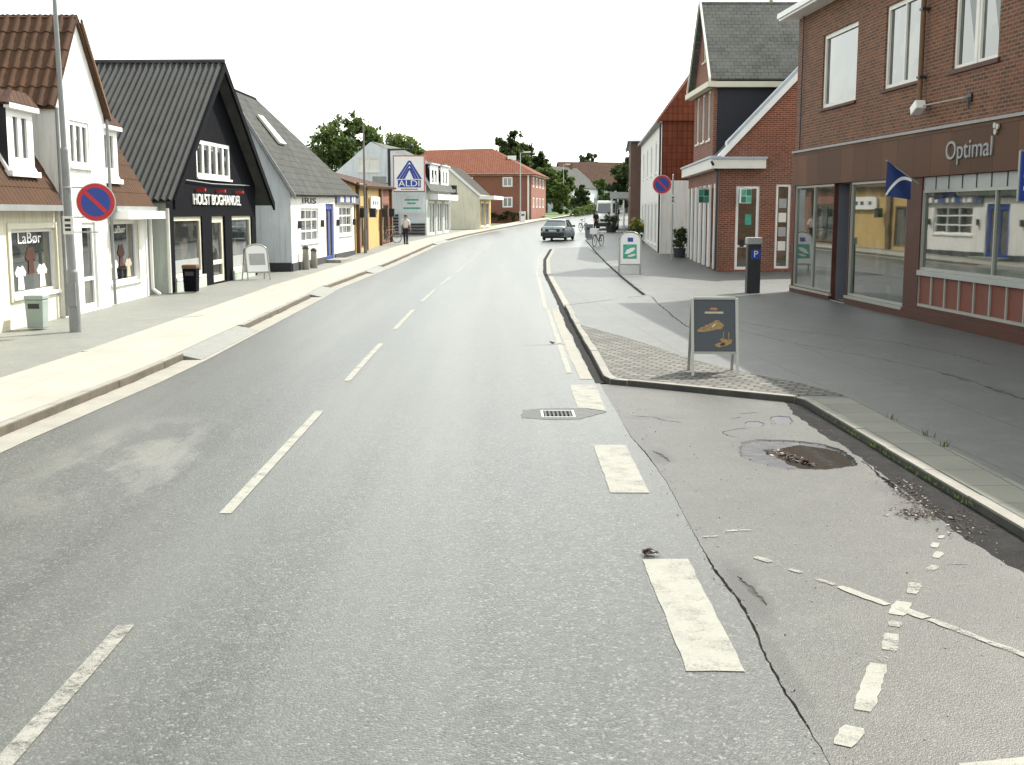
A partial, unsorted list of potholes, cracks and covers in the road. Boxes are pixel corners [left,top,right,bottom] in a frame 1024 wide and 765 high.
crack [631,437,823,752]
crack [863,462,912,499]
pothole [738,439,859,470]
